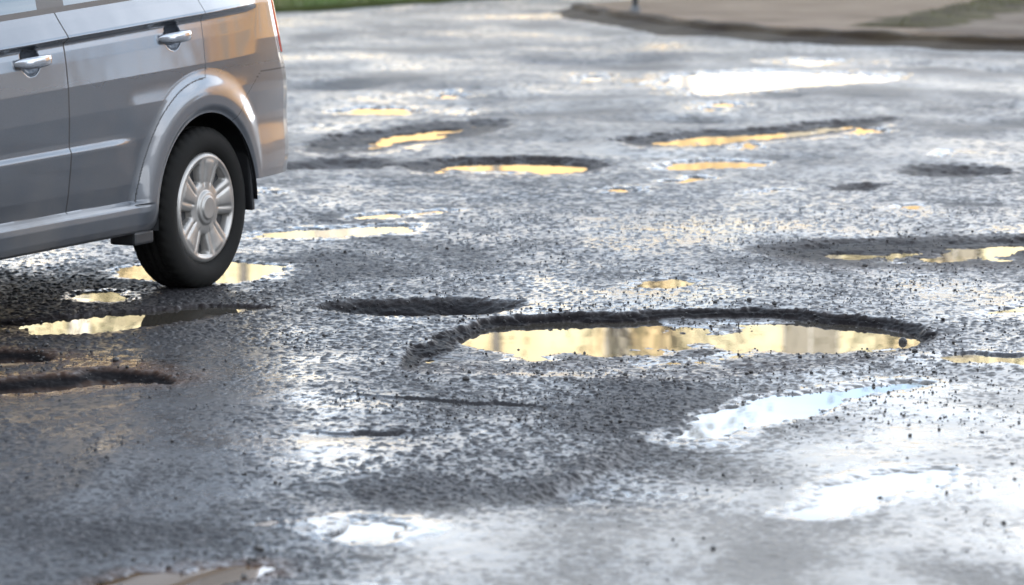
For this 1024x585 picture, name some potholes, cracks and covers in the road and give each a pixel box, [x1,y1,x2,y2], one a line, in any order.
pothole [605,116,910,150]
pothole [0,349,57,364]
pothole [824,181,896,191]
pothole [395,154,619,179]
pothole [0,366,179,395]
pothole [289,117,525,161]
pothole [397,306,943,382]
pothole [740,231,1024,273]
pothole [312,296,530,317]
pothole [0,303,275,339]
pothole [892,163,1020,178]
